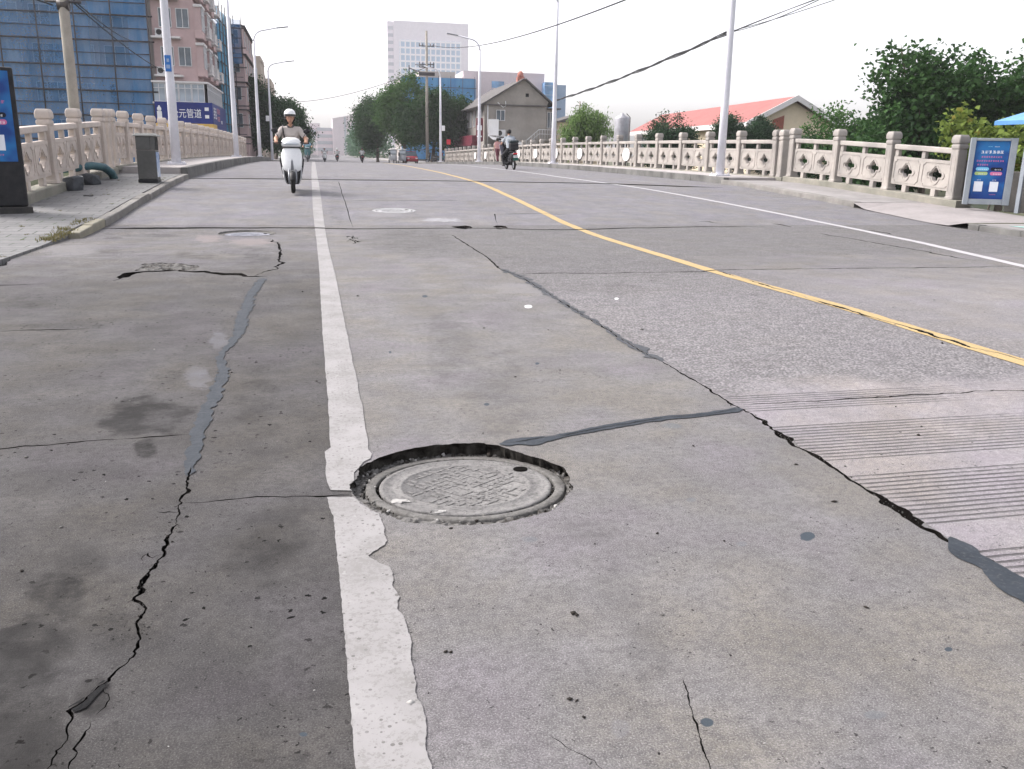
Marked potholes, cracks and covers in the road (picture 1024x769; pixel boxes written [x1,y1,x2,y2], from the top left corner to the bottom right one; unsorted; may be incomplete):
crack [452,228,1024,603]
manhole cover [364,456,566,525]
crack [682,678,711,769]
crack [339,183,454,244]
crack [1,240,355,769]
